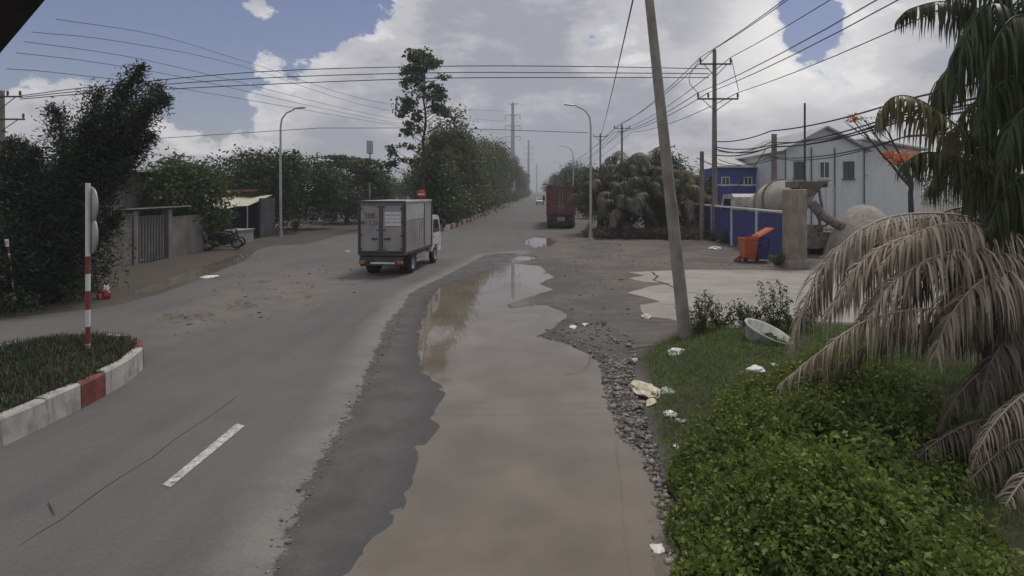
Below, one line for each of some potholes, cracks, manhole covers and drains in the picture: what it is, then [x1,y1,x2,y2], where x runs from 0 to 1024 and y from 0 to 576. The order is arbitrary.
pothole [224,300,259,310]
pothole [155,312,216,324]
crack [19,398,235,546]
